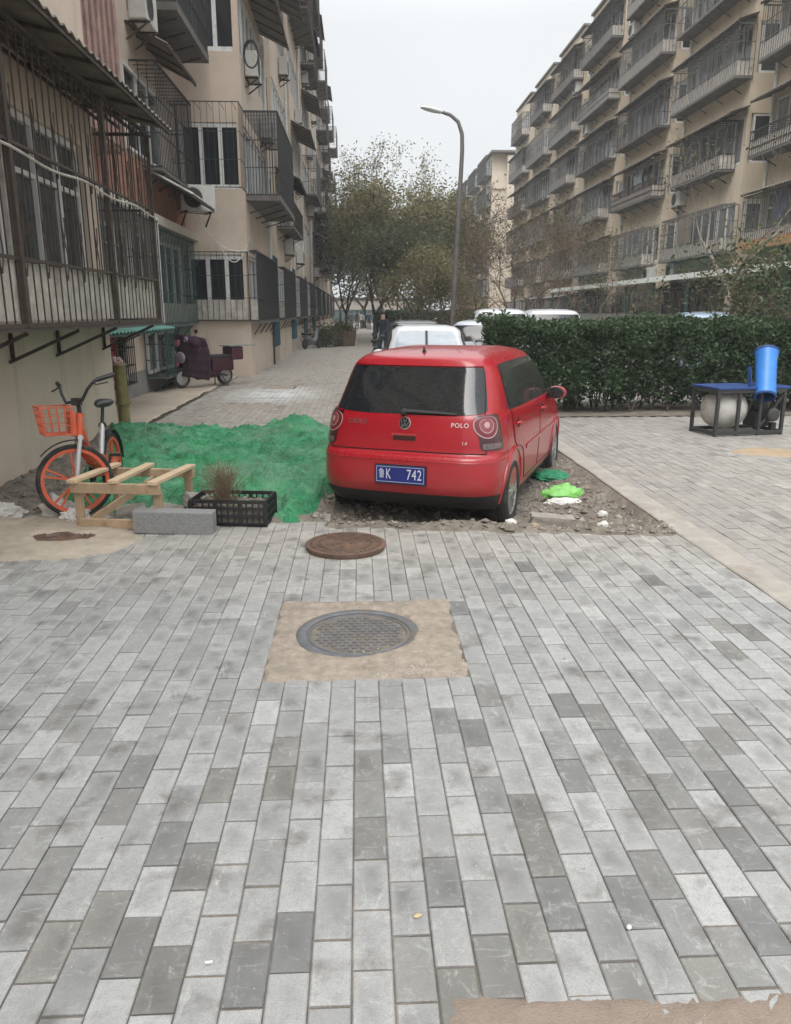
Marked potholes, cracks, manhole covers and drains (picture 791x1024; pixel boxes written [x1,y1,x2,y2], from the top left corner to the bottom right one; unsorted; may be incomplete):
manhole cover [305,532,386,560]
manhole cover [296,610,418,657]
